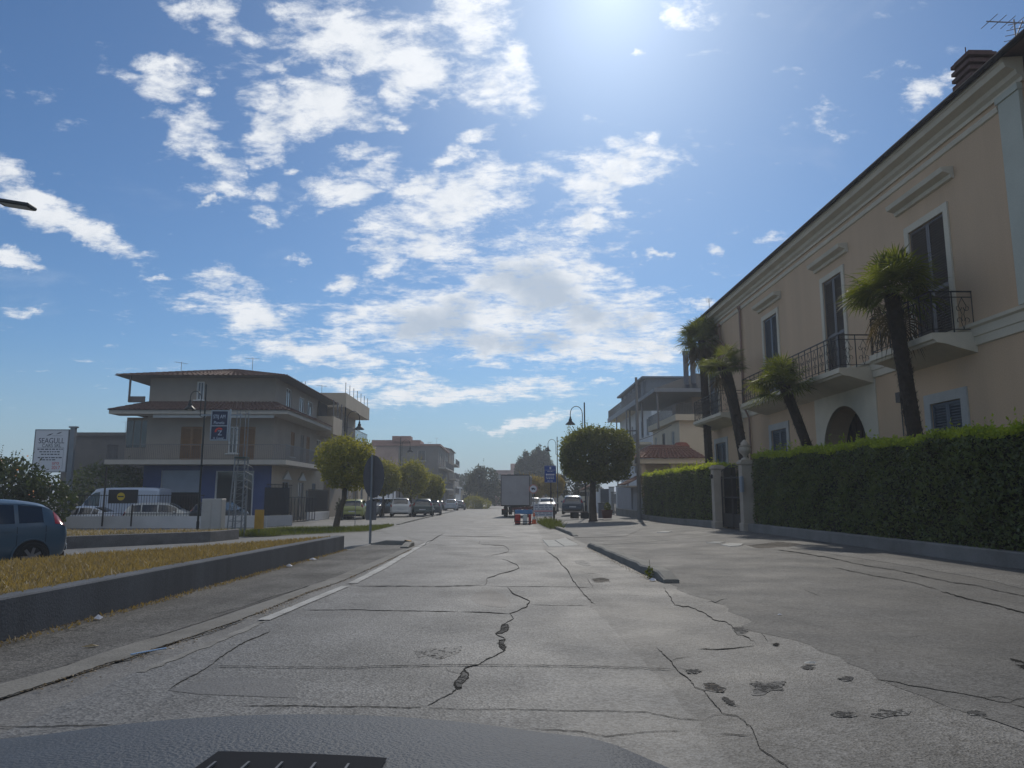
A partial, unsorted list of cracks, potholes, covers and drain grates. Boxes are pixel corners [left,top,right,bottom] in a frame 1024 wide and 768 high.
pothole [869,709,911,718]
pothole [703,682,725,693]
pothole [749,681,786,695]
crack [774,549,1024,613]
crack [168,539,788,768]
crack [877,679,1023,707]
